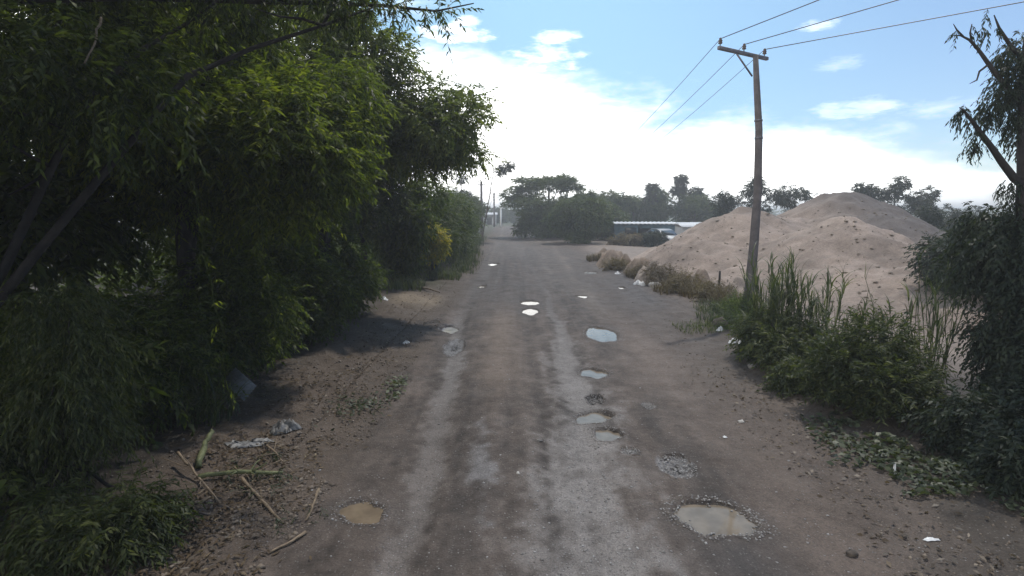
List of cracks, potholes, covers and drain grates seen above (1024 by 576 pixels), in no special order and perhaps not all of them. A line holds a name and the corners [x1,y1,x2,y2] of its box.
pothole [640,401,659,410]
pothole [438,324,461,335]
pothole [650,494,781,545]
pothole [520,307,541,316]
pothole [583,394,606,406]
pothole [571,408,624,425]
pothole [441,338,467,358]
pothole [576,366,613,380]
pothole [654,452,699,480]
pothole [619,446,642,456]
pothole [326,495,393,528]
pothole [590,425,627,444]
